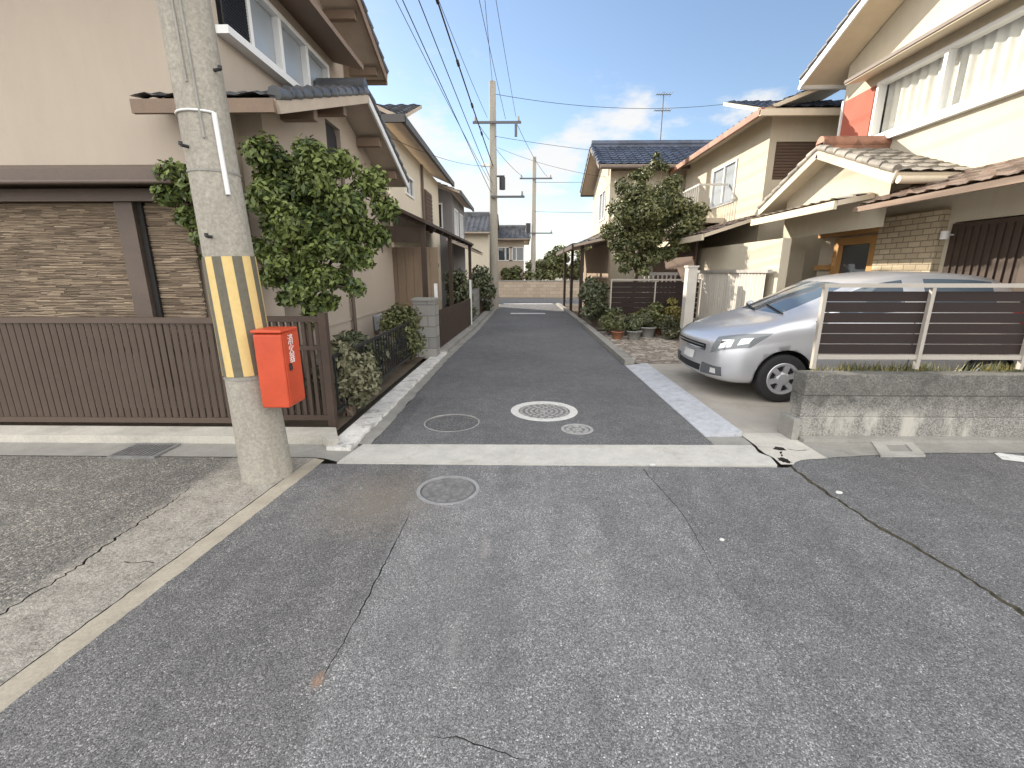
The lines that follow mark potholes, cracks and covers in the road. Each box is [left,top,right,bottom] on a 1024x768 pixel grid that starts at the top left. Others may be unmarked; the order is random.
manhole cover [424,414,480,432]
crack [643,469,733,603]
crack [324,511,410,675]
crack [0,482,197,615]
manhole cover [416,475,479,505]
crack [431,735,536,762]
manhole cover [511,401,578,421]
drain grate [107,443,181,459]
manhole cover [561,424,593,435]
